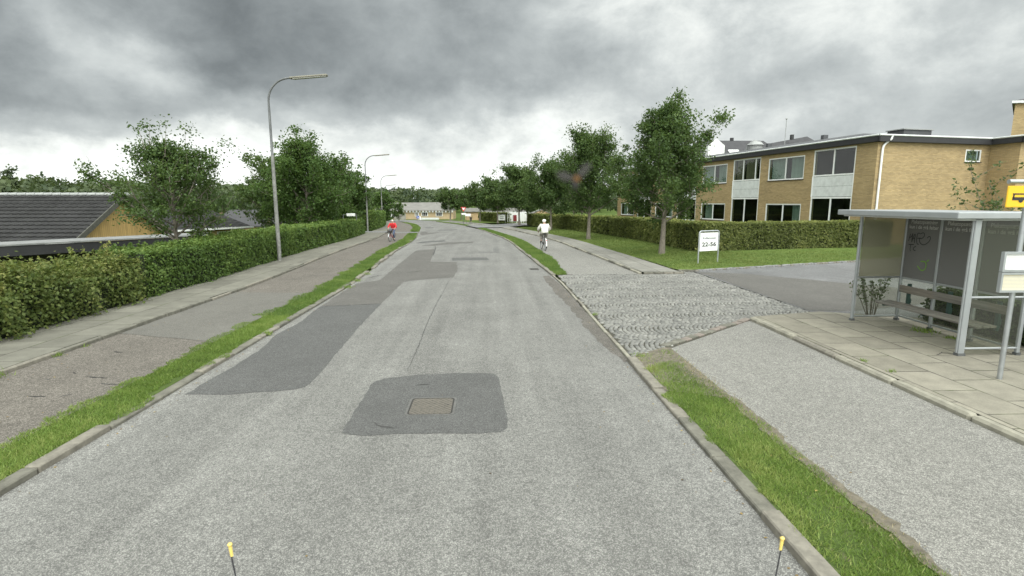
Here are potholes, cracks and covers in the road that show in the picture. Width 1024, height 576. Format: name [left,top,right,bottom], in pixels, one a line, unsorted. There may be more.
manhole cover [405,397,457,416]
